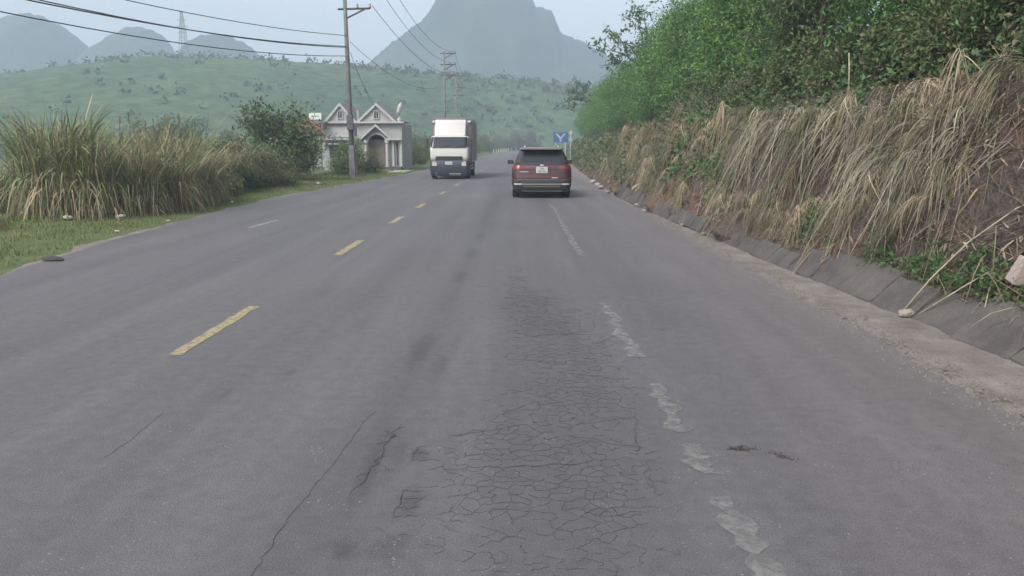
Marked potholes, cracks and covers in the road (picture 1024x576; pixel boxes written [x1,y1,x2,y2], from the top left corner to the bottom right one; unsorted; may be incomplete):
crack [349,427,432,496]
crack [251,412,375,576]
crack [377,271,694,576]
